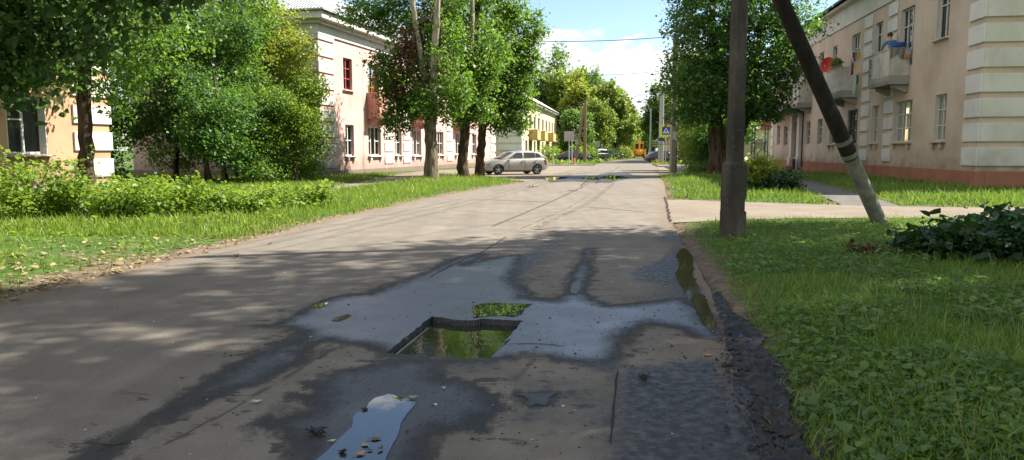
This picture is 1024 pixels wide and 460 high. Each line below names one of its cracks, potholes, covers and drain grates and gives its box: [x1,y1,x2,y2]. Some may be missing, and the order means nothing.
pothole [387,316,523,359]
crack [430,237,506,277]
